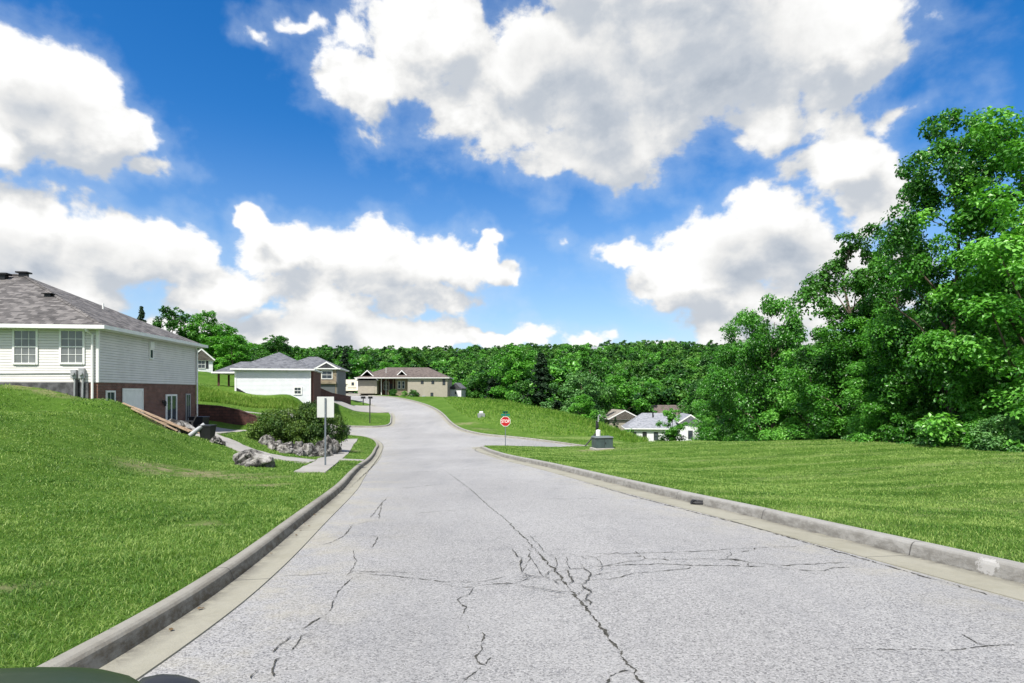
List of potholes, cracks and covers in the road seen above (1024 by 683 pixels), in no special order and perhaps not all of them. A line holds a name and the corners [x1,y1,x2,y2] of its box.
crack [250,475,1023,683]
